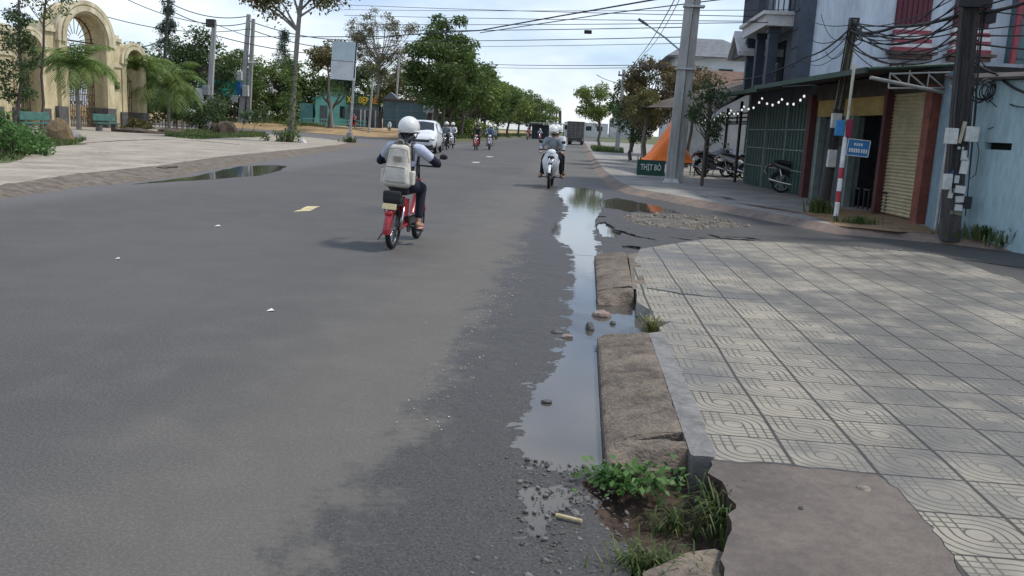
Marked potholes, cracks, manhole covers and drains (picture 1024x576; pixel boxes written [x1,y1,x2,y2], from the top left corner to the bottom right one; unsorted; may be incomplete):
pothole [596,222,622,238]
